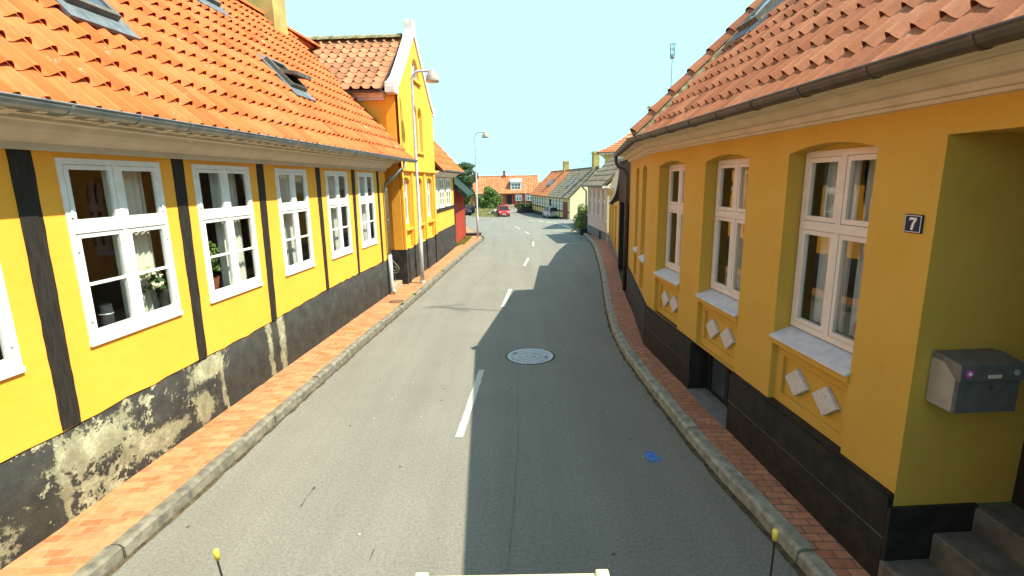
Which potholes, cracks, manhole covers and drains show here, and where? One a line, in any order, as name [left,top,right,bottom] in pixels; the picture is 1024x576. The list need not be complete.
manhole cover [506,348,555,365]
